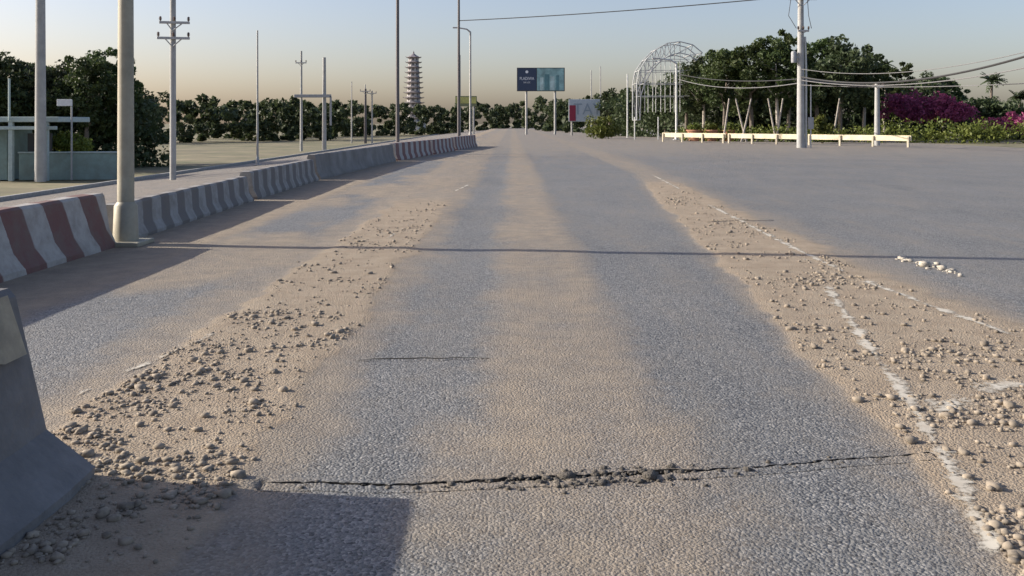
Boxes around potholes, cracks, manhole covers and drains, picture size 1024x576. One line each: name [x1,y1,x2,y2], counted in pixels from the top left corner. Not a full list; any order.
crack [260,448,937,494]
